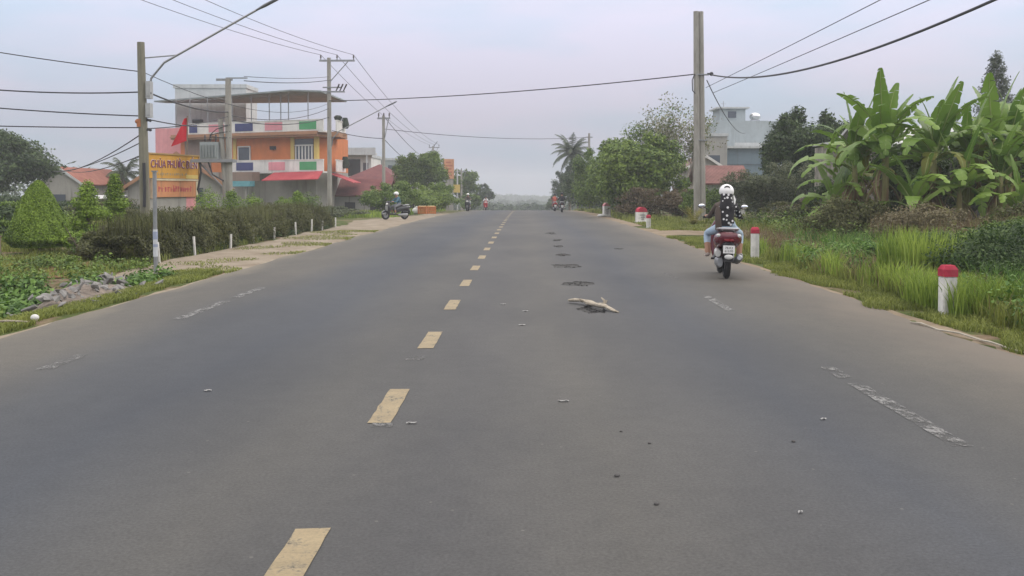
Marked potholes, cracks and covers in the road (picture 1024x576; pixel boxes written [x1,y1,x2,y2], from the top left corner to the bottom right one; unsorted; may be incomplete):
pothole [576,305,606,314]
